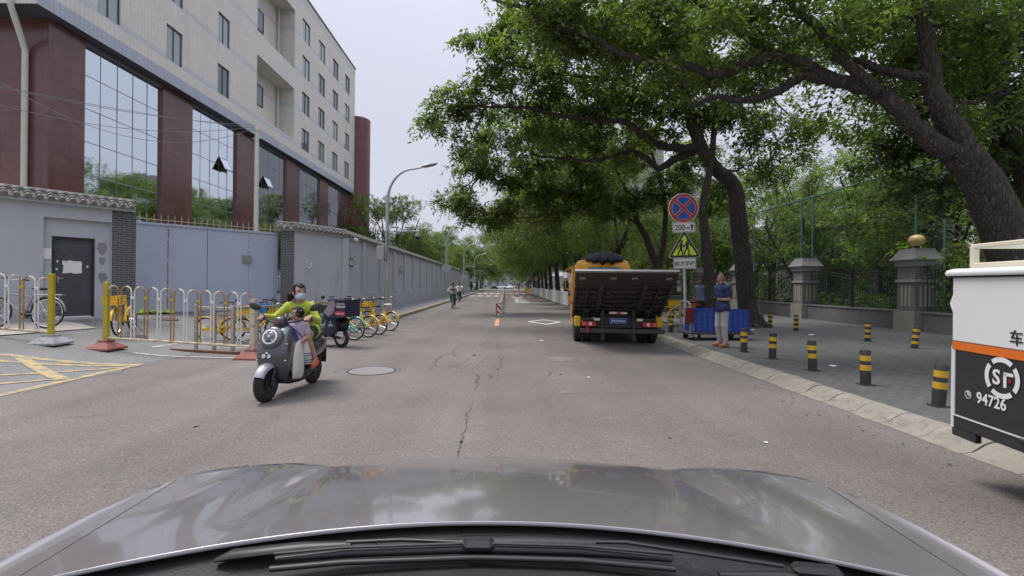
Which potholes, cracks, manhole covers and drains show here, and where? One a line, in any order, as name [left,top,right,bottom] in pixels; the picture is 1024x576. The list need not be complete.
crack [429,342,503,458]
manhole cover [347,366,397,376]
